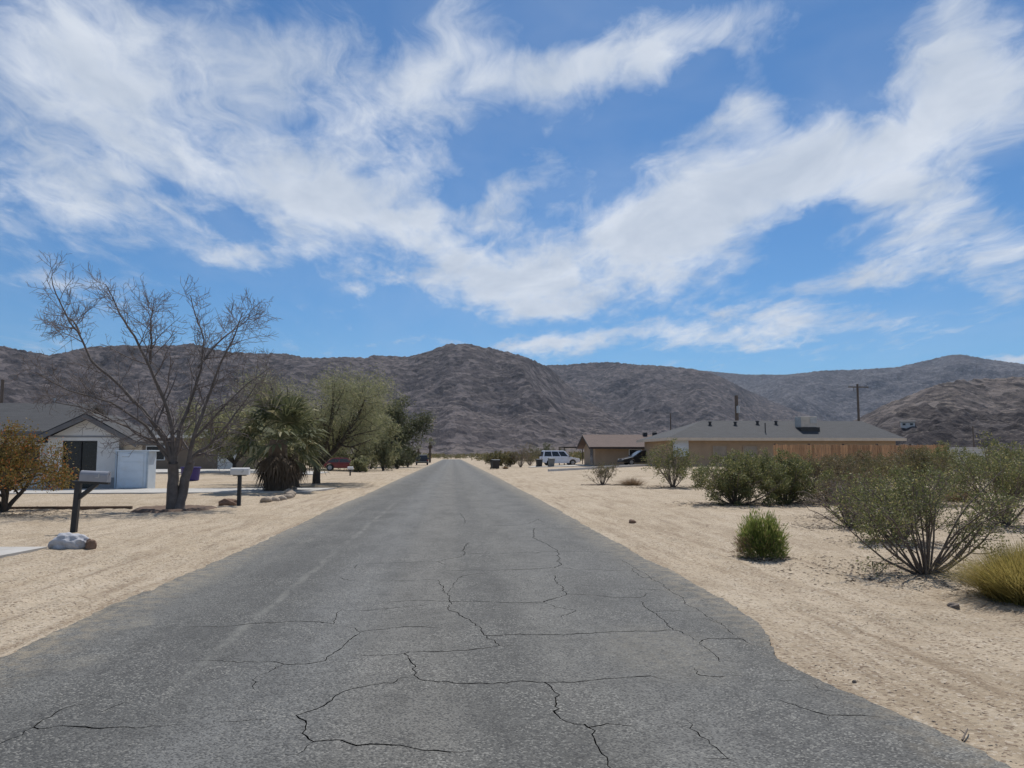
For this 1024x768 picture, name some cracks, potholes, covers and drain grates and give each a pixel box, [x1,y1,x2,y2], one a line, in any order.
crack [285,573,669,768]
crack [771,699,877,723]
crack [626,562,748,677]
crack [688,721,734,761]
crack [183,604,435,690]
crack [1,700,186,743]
crack [399,519,613,571]
